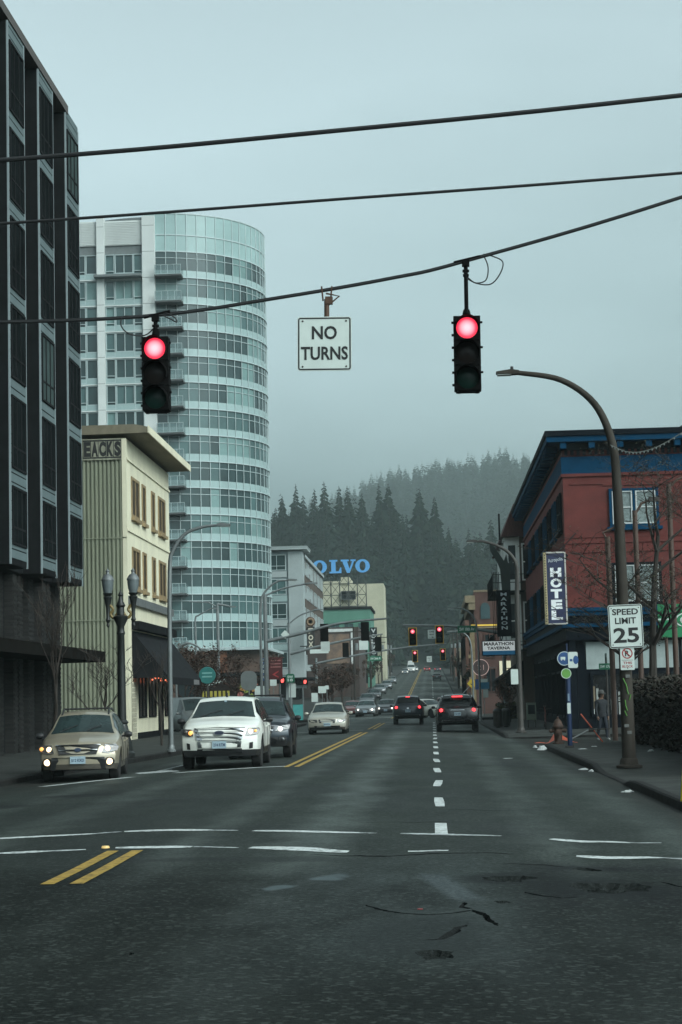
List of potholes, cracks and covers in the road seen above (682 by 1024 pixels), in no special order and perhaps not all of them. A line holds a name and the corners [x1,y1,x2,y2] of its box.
crack [365,902,498,940]
pothole [415,950,454,960]
pothole [570,882,651,894]
